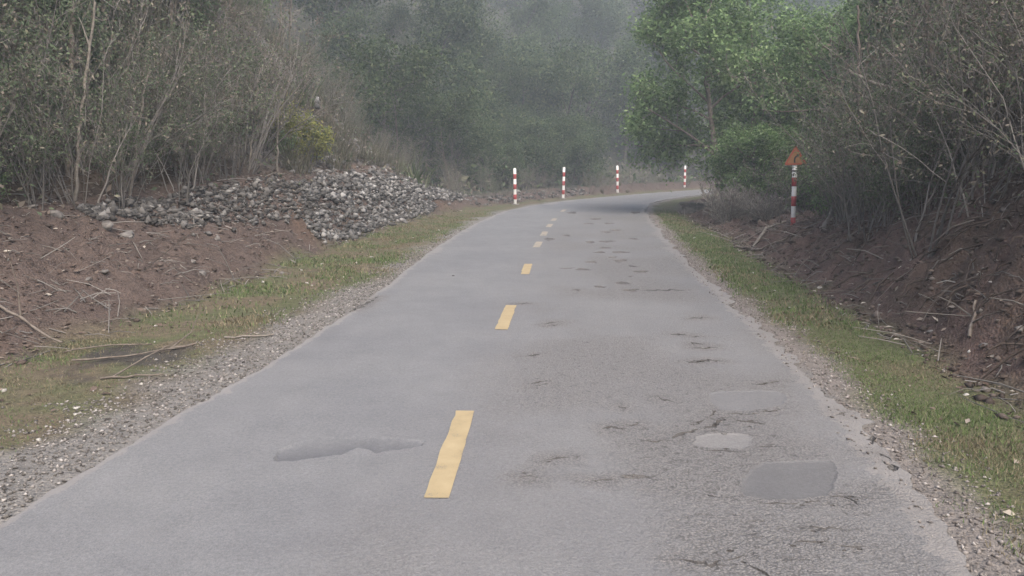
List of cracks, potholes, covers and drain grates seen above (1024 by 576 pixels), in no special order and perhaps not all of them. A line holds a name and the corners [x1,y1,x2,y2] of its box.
crack [680,546,770,576]
crack [603,406,780,453]
crack [790,525,866,551]
crack [672,317,720,363]
crack [760,495,859,509]
